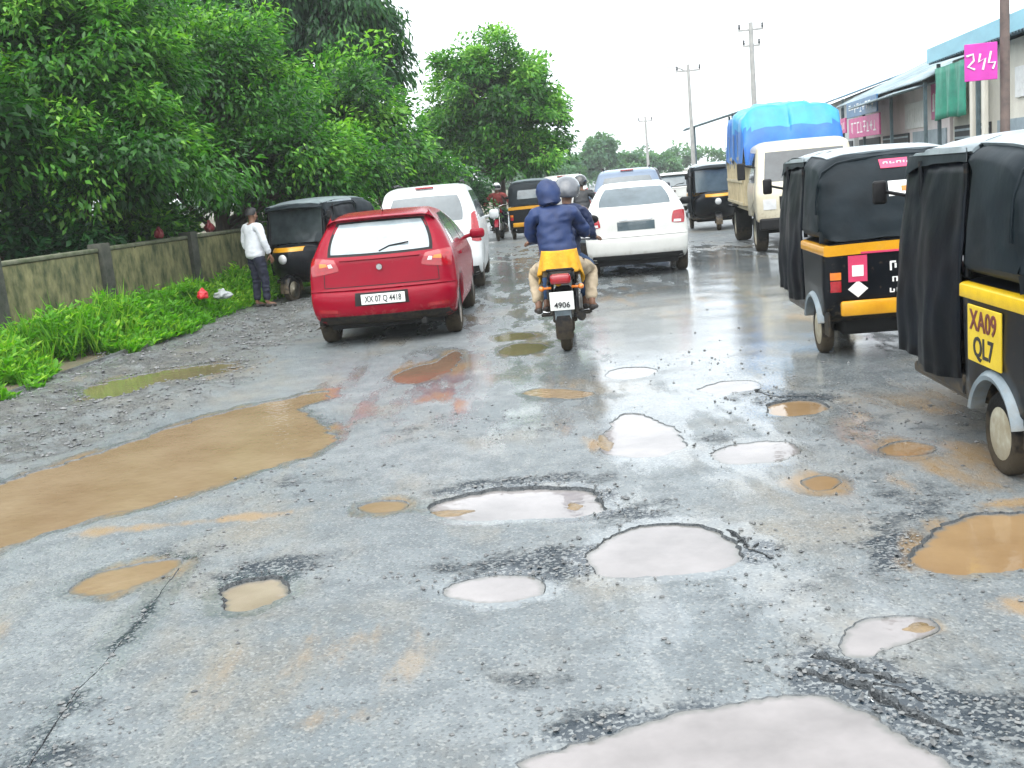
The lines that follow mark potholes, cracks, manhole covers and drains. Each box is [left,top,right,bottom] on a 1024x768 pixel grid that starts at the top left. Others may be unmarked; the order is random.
crack [27,568,179,768]
pothole [766,398,830,416]
pothole [427,485,608,521]
pothole [584,523,744,578]
pothole [906,511,1024,575]
pothole [218,575,291,612]
pothole [877,440,938,457]
pothole [67,558,183,597]
pothole [0,390,340,548]
pothole [800,475,843,491]
pothole [442,574,546,603]
pothole [597,413,688,458]
